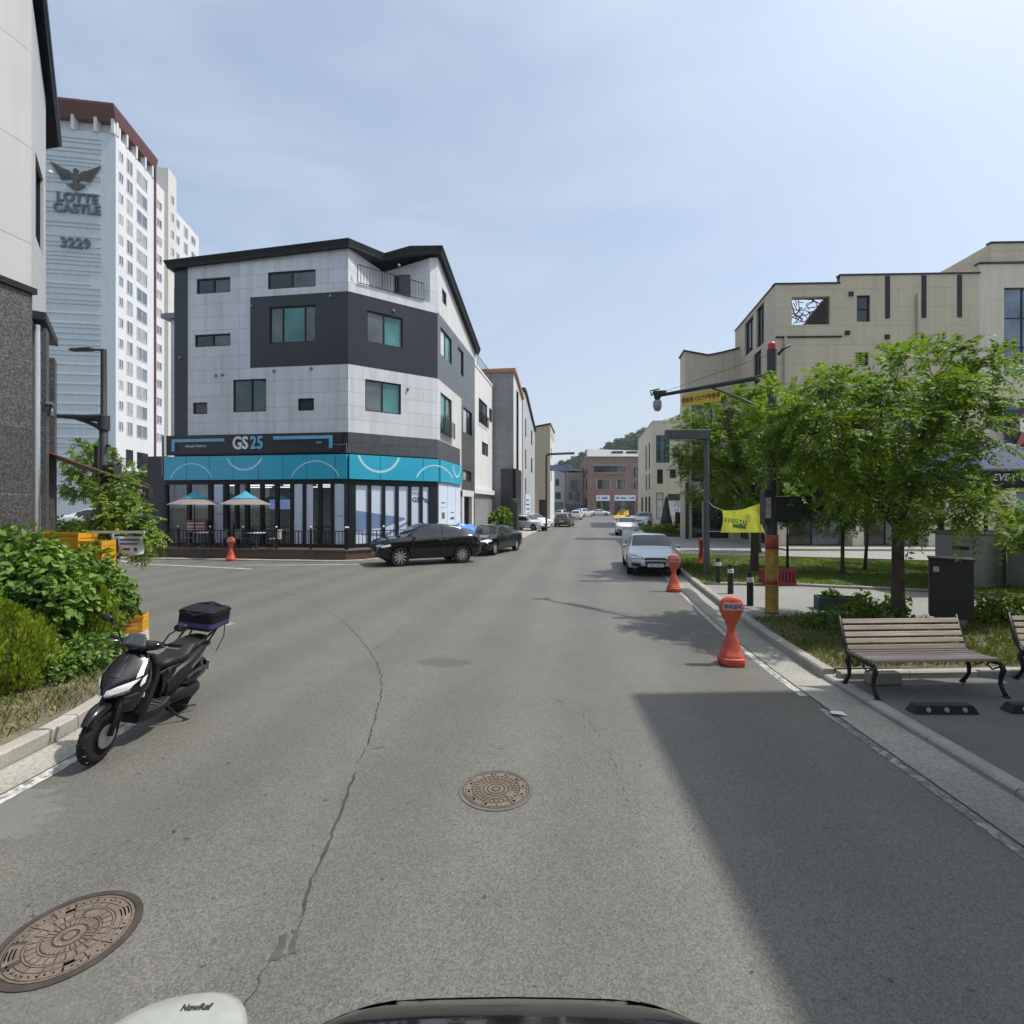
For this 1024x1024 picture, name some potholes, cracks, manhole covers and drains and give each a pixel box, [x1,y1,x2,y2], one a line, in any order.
crack [227,581,430,1006]
manhole cover [0,890,143,993]
manhole cover [459,770,533,812]
